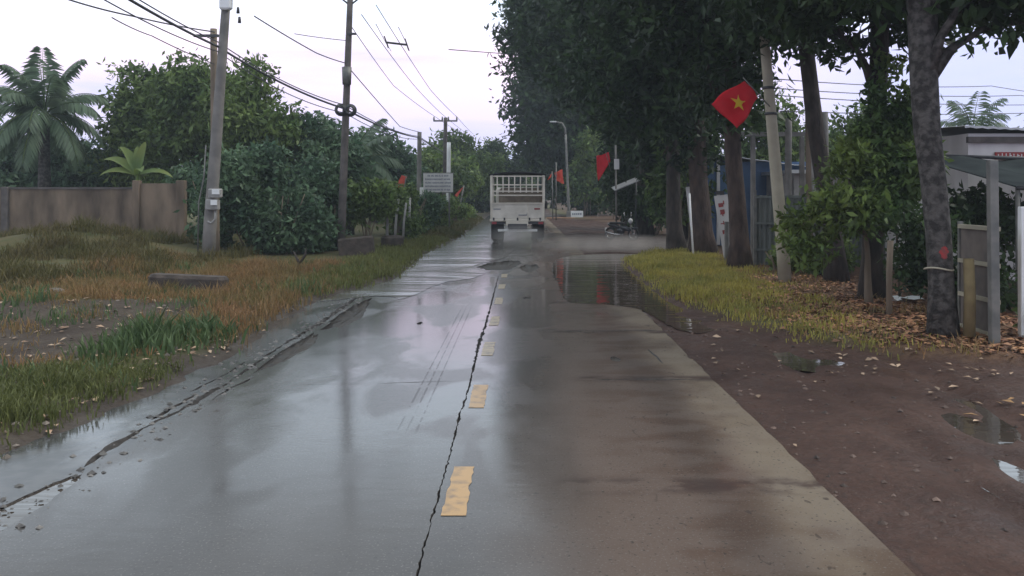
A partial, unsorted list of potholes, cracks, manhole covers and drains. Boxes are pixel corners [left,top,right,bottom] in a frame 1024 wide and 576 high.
crack [380,275,499,576]
pothole [476,260,521,270]
crack [84,299,355,467]
pothole [520,264,539,273]
